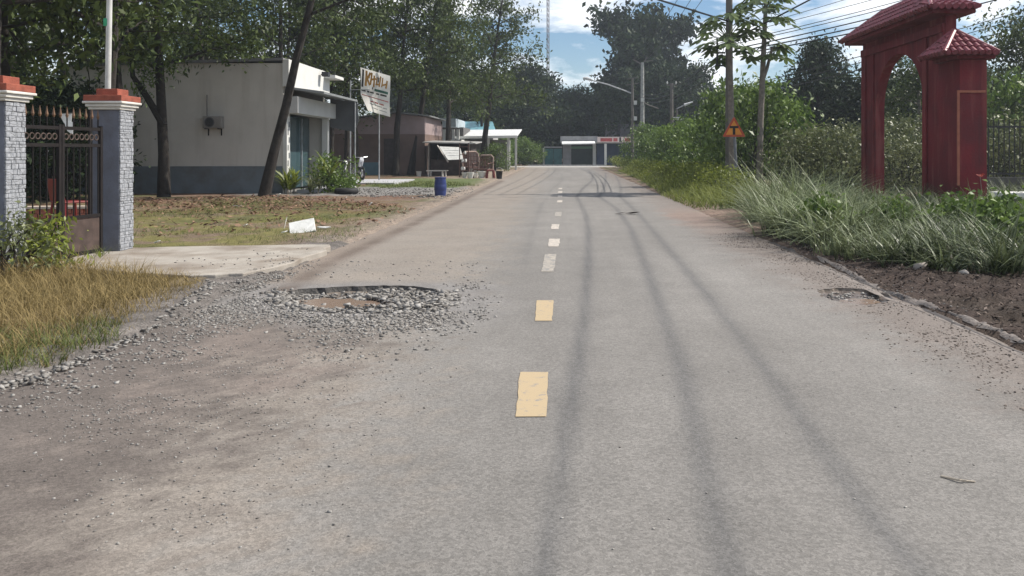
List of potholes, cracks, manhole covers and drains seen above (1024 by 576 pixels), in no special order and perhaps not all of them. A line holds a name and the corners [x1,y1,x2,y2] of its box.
pothole [259,285,471,315]
pothole [818,288,896,305]
